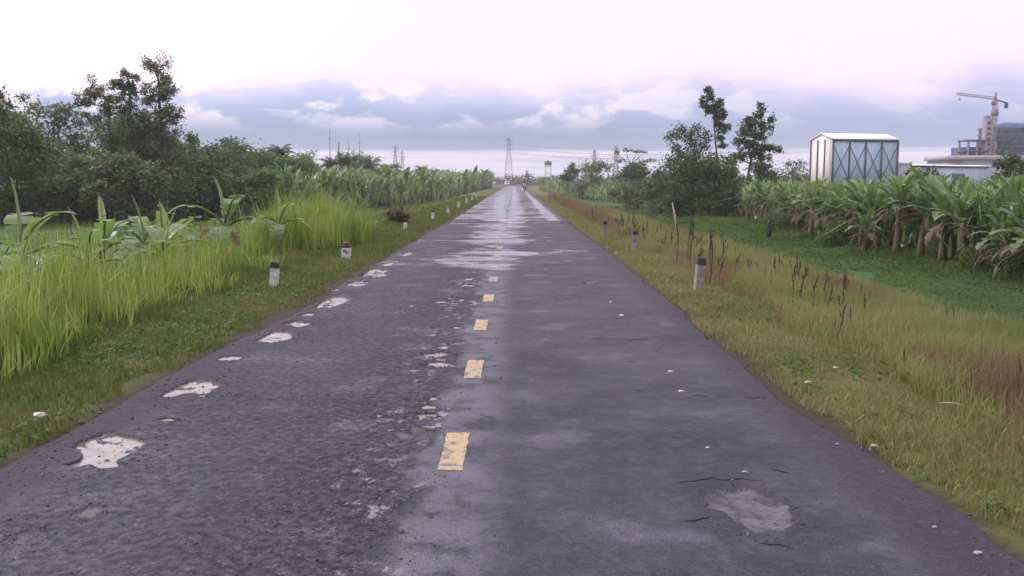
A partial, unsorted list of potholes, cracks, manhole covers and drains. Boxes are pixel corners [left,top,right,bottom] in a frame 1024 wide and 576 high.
pothole [359,268,393,277]
pothole [255,331,295,343]
crack [679,469,789,483]
pothole [62,430,150,468]
pothole [315,294,352,309]
pothole [157,378,224,398]
